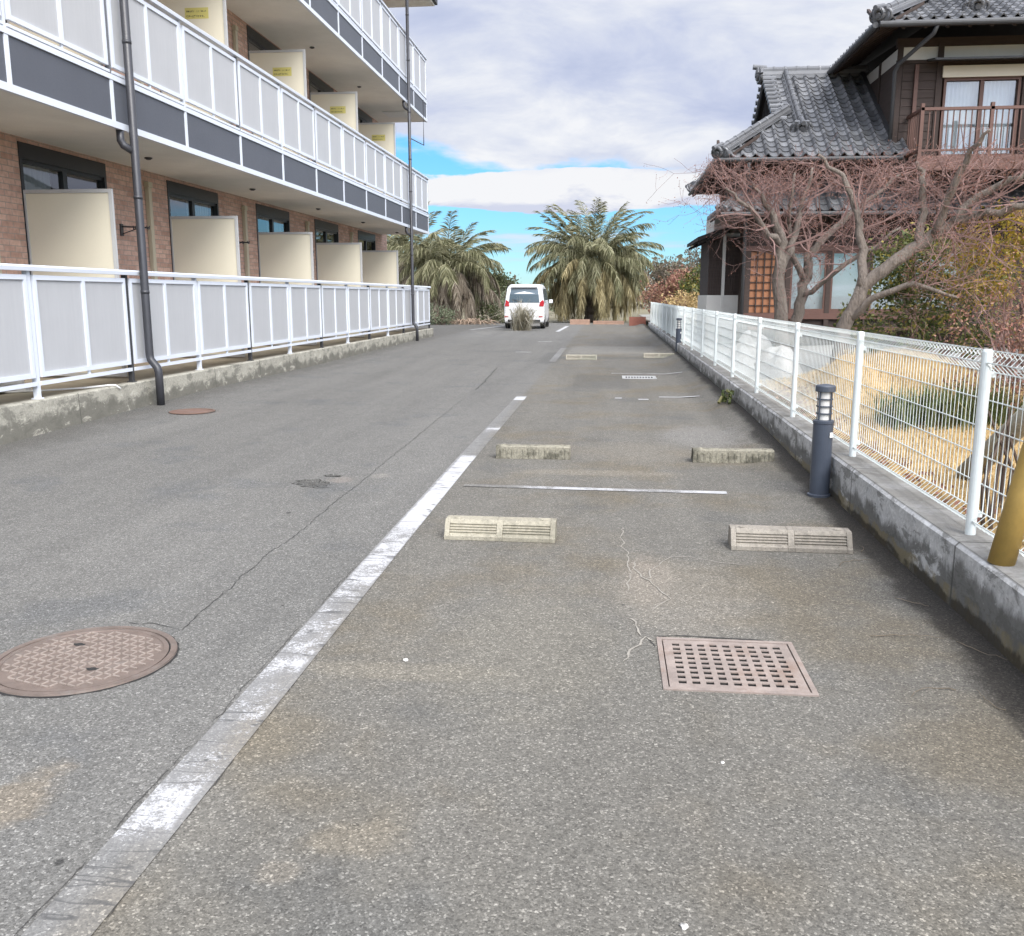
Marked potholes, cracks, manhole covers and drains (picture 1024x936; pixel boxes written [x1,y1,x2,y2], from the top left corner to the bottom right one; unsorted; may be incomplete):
crack [129,401,460,630]
drain grate [656,637,820,697]
manhole cover [0,626,180,698]
crack [620,528,734,609]
